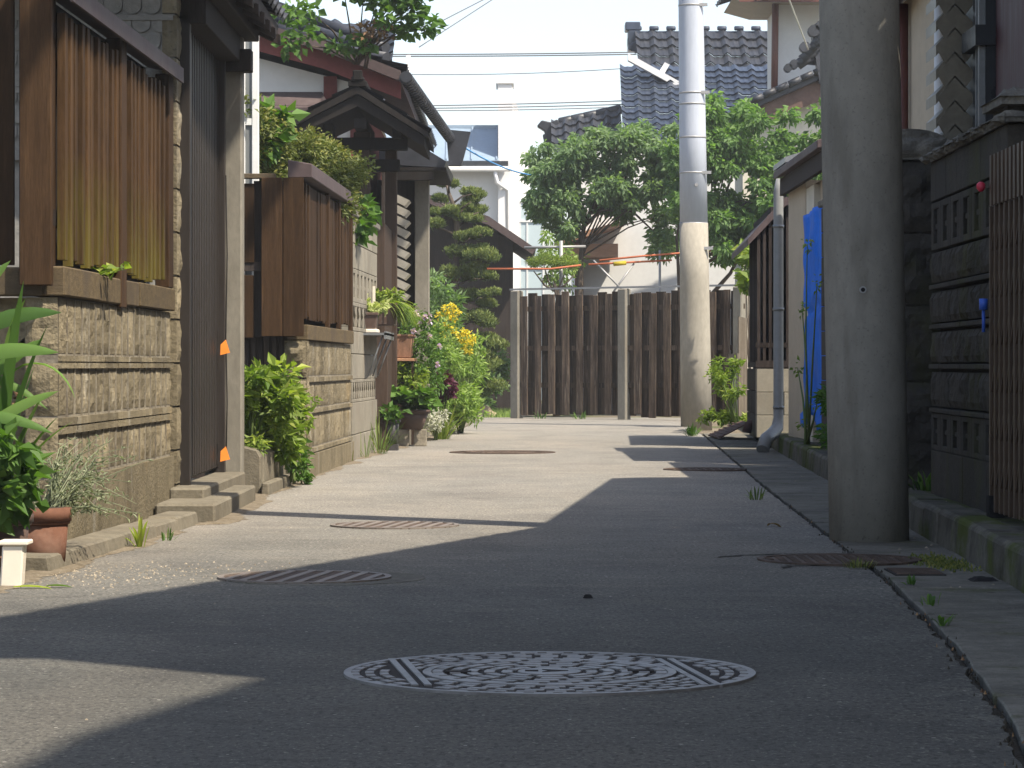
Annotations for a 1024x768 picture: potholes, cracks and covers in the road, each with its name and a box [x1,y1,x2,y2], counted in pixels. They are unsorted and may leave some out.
manhole cover [344,651,756,697]
manhole cover [757,553,922,567]
